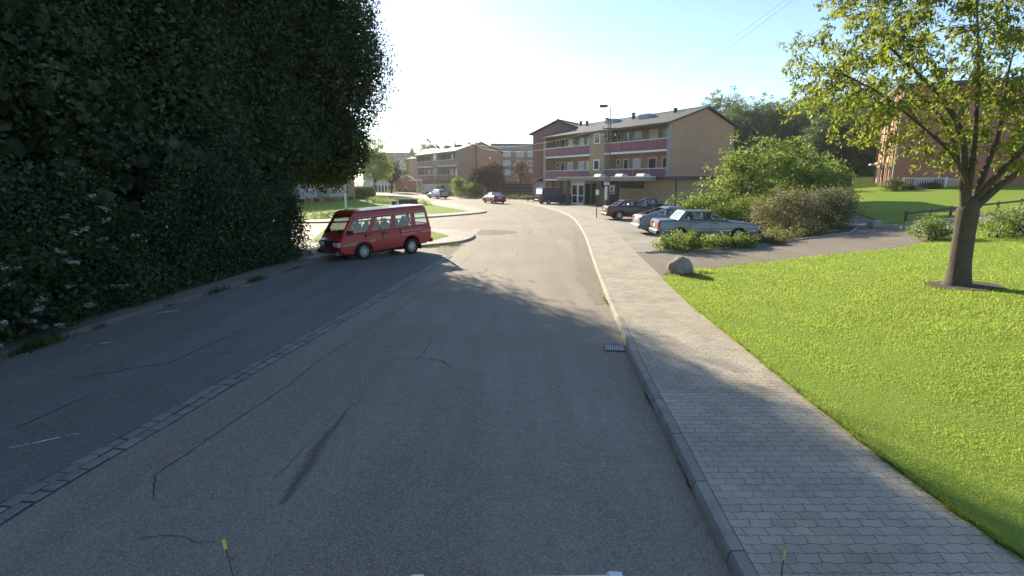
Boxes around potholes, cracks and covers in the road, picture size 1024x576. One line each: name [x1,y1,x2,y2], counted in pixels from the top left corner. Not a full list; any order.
crack [69,324,245,379]
crack [153,253,485,502]
drain grate [604,344,625,352]
